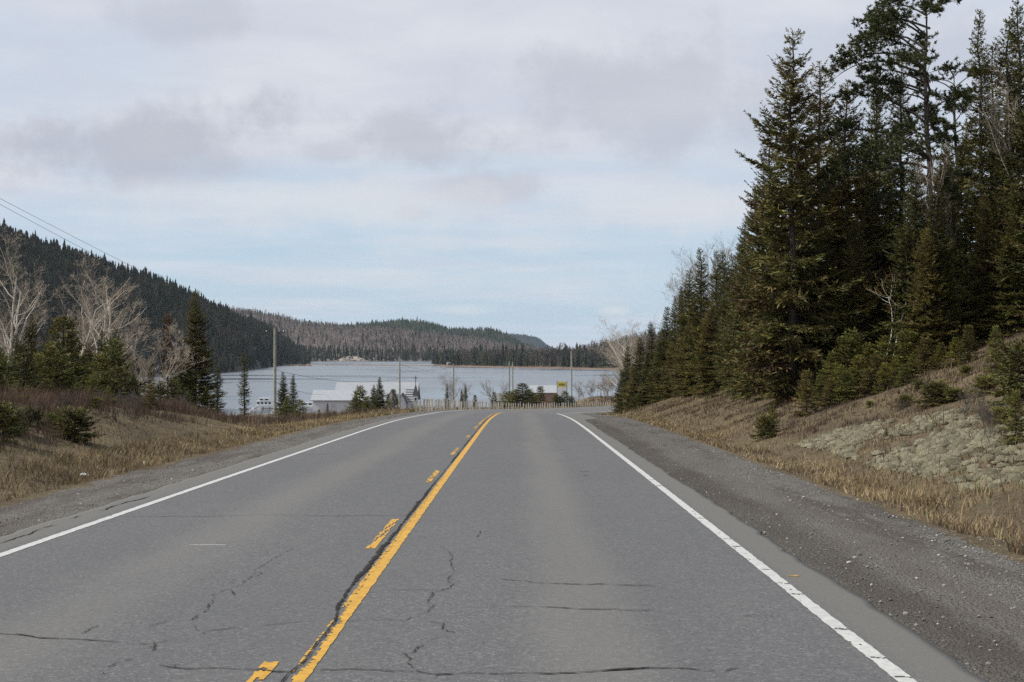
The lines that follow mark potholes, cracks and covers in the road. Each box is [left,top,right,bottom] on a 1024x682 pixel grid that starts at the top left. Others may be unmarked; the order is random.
crack [2,531,734,675]
